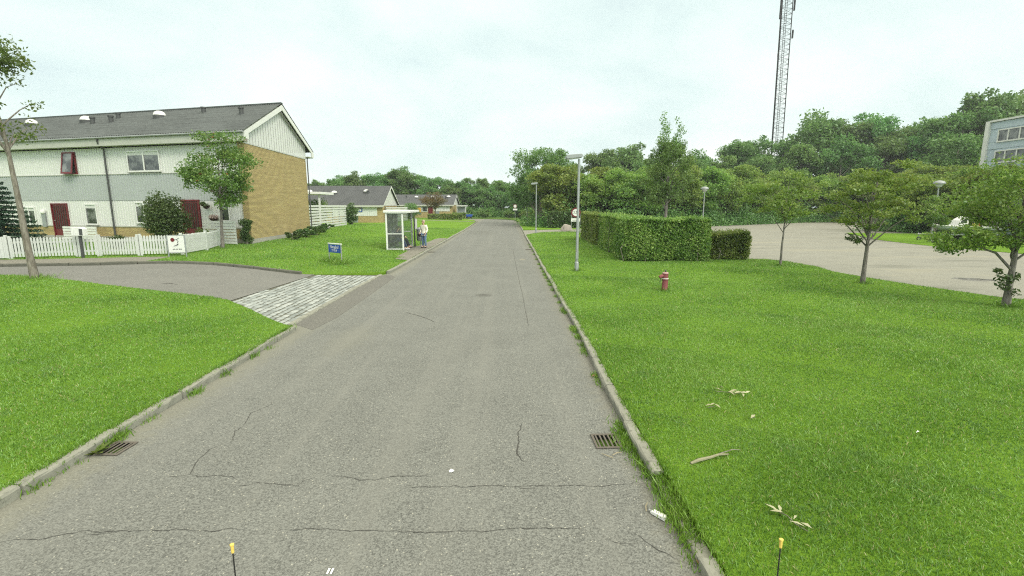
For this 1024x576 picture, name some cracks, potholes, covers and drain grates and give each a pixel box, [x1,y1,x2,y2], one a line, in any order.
crack [168,406,312,486]
drain grate [590,433,622,449]
crack [331,475,632,489]
drain grate [93,441,138,456]
crack [0,528,236,543]
